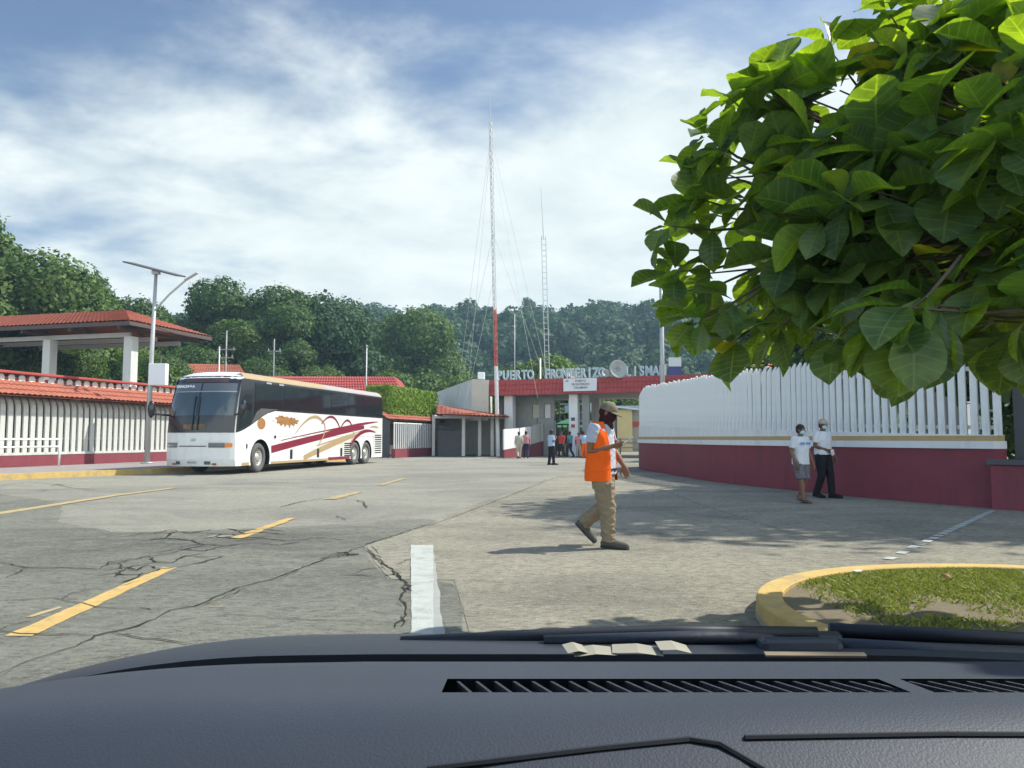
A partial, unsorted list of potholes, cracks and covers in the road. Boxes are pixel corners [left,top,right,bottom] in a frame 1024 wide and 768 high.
crack [0,498,412,676]
